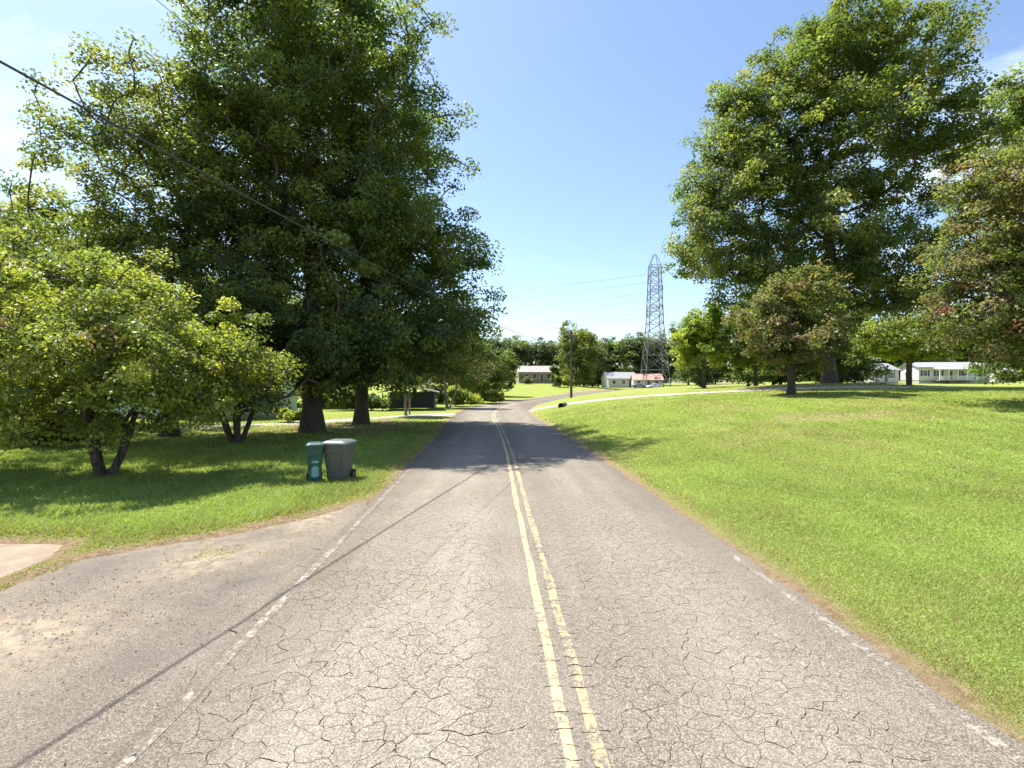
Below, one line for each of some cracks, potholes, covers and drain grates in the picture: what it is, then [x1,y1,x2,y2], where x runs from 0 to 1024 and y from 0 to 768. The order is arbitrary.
crack [535,462,922,768]
crack [167,496,525,768]
